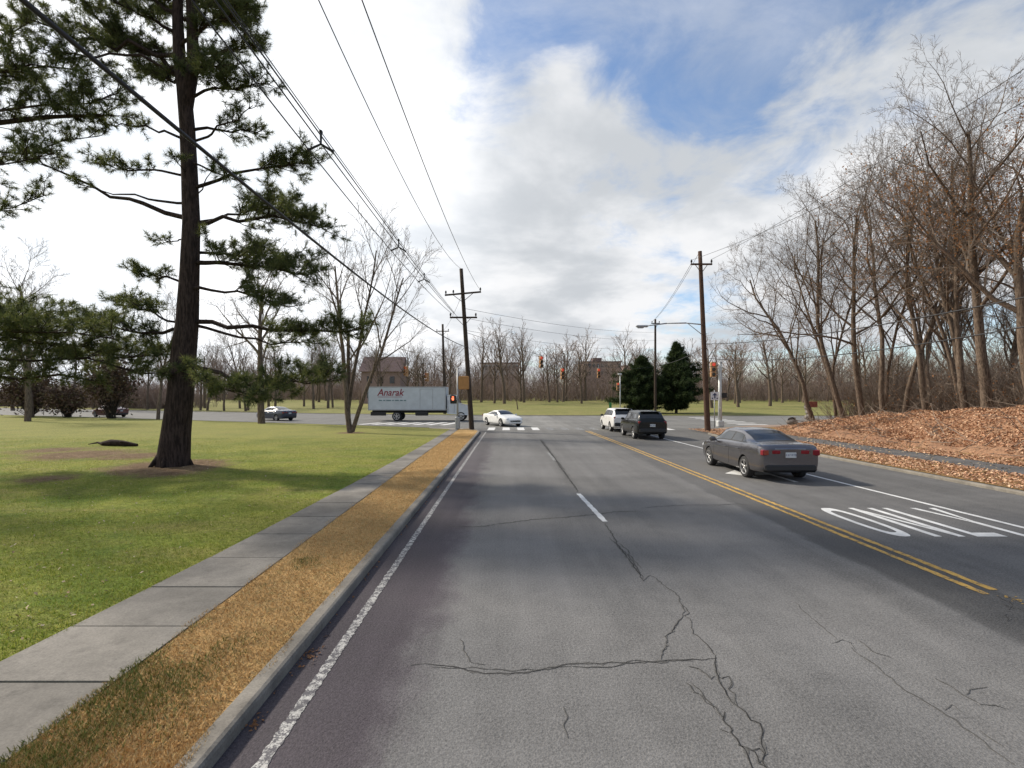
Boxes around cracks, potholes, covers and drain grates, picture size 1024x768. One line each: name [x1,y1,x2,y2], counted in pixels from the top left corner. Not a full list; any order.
crack [445,440,745,581]
crack [795,602,1013,764]
crack [410,575,768,768]
